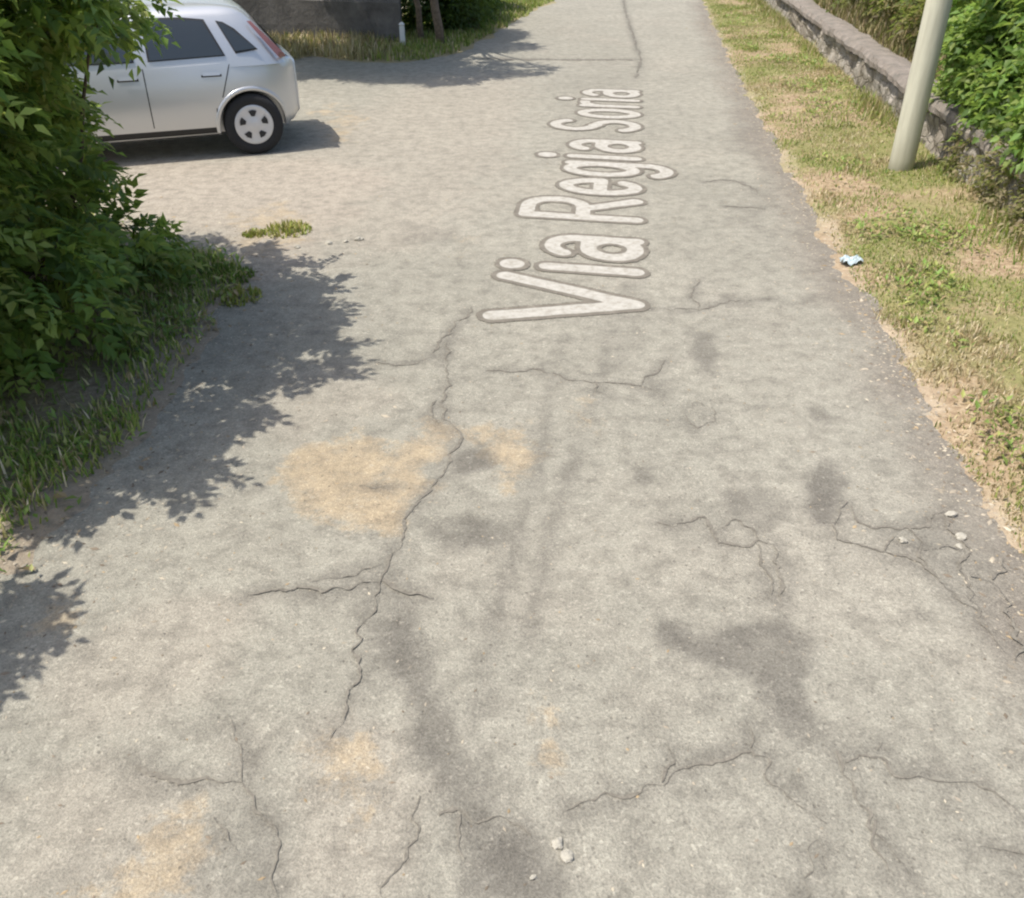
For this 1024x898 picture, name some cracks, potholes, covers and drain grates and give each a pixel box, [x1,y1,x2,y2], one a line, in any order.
crack [379,795,421,898]
crack [438,806,532,858]
crack [667,279,771,310]
crack [135,717,281,896]
crack [252,307,473,738]
crack [490,360,665,397]
crack [658,516,785,606]
crack [835,741,1023,871]
crack [564,728,826,898]
crack [832,501,1024,661]
